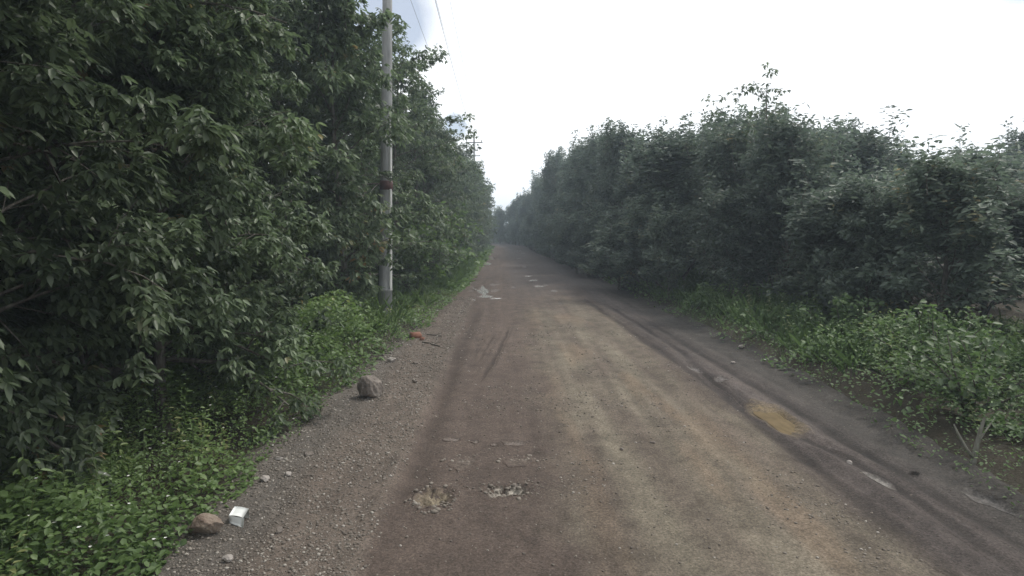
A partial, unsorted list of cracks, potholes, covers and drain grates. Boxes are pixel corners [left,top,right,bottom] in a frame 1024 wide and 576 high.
pothole [496,453,541,468]
pothole [404,482,460,515]
pothole [475,481,540,500]
pothole [743,398,818,441]
